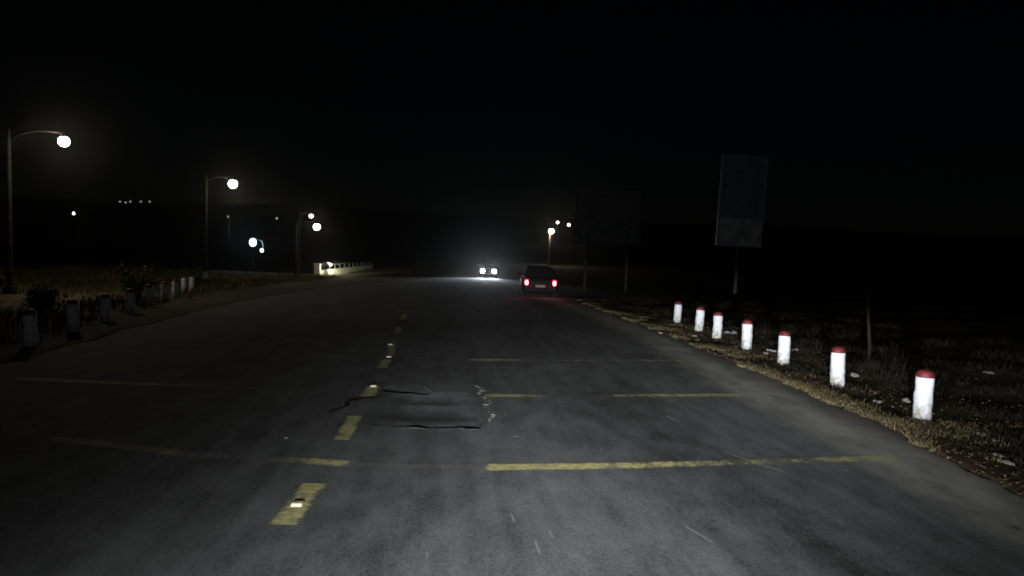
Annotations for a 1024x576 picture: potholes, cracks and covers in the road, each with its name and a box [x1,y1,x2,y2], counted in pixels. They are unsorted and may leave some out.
crack [327,396,383,413]
